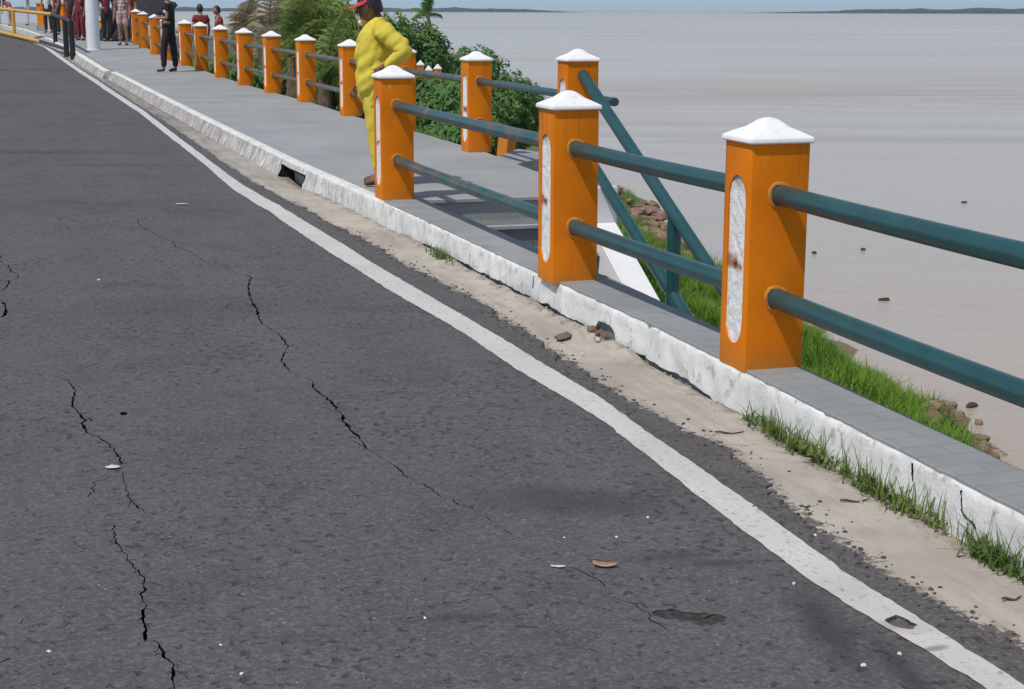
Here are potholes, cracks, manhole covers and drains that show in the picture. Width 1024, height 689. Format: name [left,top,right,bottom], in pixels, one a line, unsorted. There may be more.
crack [569,567,669,631]
crack [40,374,189,689]
crack [136,219,514,537]
crack [0,255,19,317]
pothole [652,609,727,626]
pothole [886,617,915,628]
